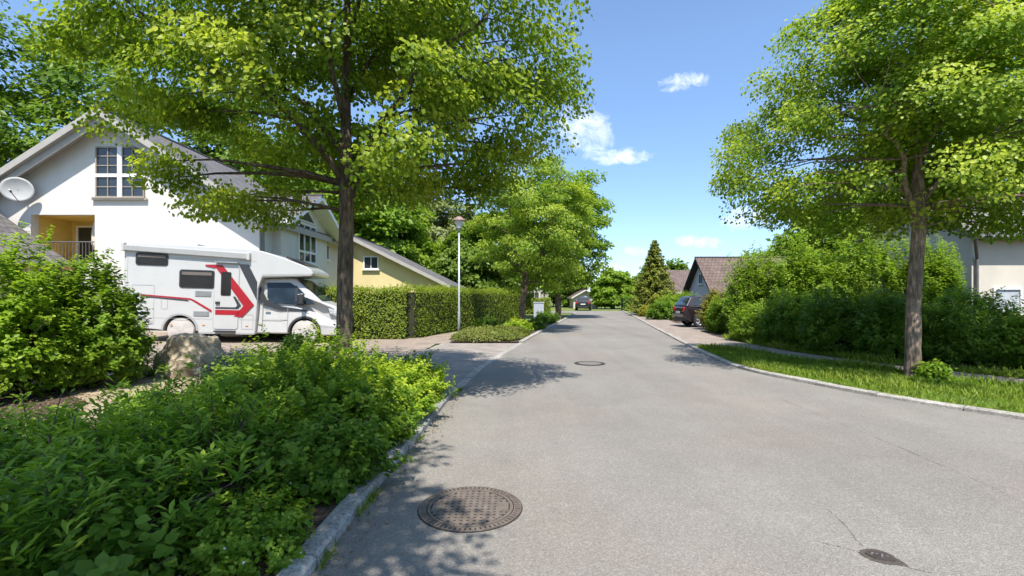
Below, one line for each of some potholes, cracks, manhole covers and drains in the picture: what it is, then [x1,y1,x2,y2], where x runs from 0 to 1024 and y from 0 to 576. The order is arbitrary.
utility cover [858,549,909,567]
manhole cover [417,486,523,533]
